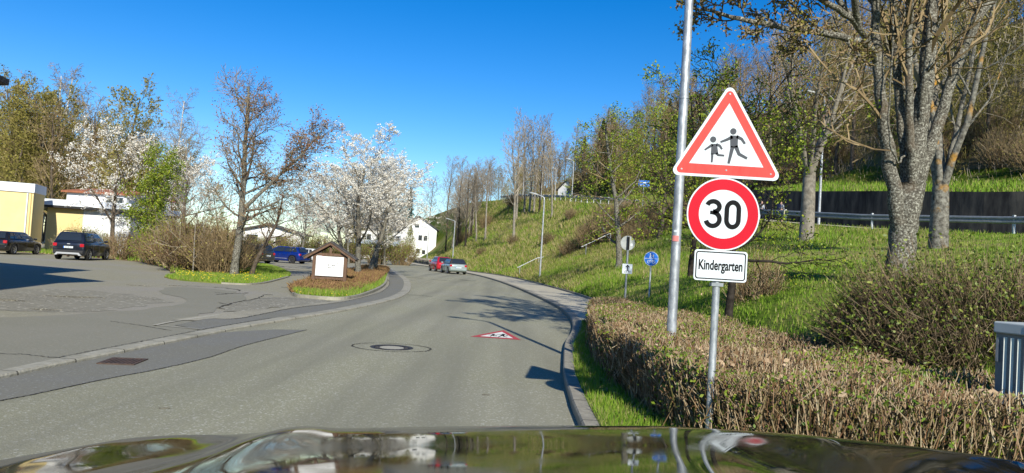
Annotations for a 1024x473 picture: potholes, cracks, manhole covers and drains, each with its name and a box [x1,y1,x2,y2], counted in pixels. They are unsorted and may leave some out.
drain grate [96,357,148,365]
